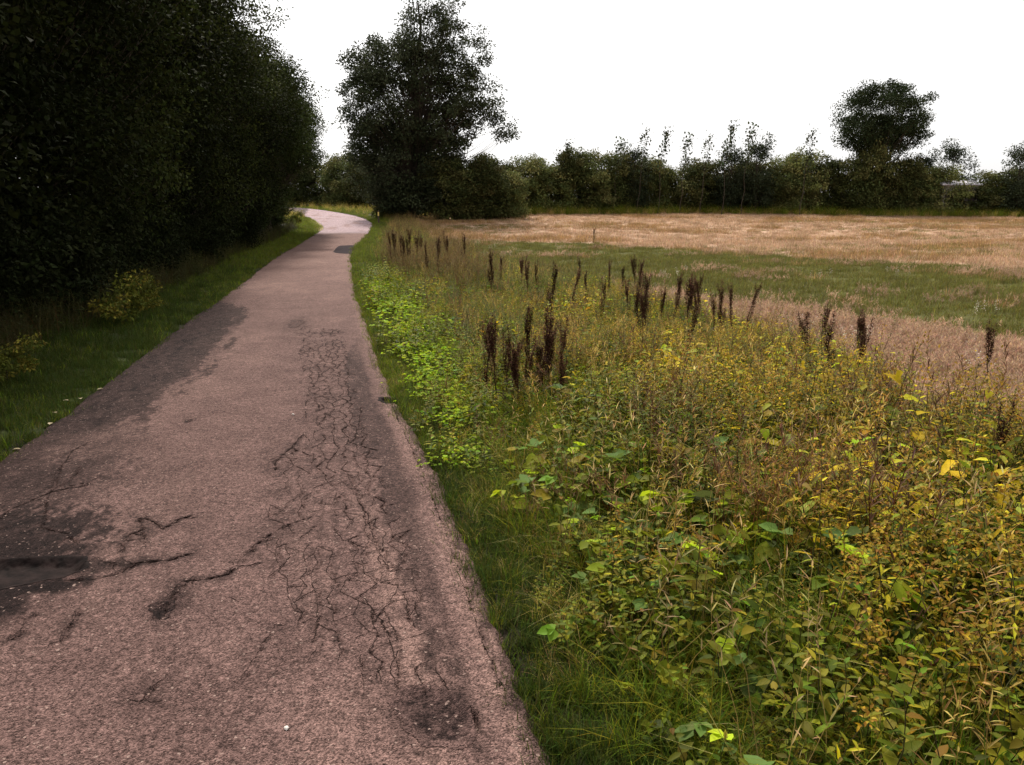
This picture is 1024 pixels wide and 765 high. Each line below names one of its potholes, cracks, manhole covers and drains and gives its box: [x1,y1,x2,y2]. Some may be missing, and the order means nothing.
crack [389,398,515,702]
crack [5,611,76,648]
pothole [387,683,478,750]
crack [263,328,449,693]
crack [140,516,312,617]
pothole [0,555,90,589]
crack [64,514,195,581]
crack [0,444,98,543]
